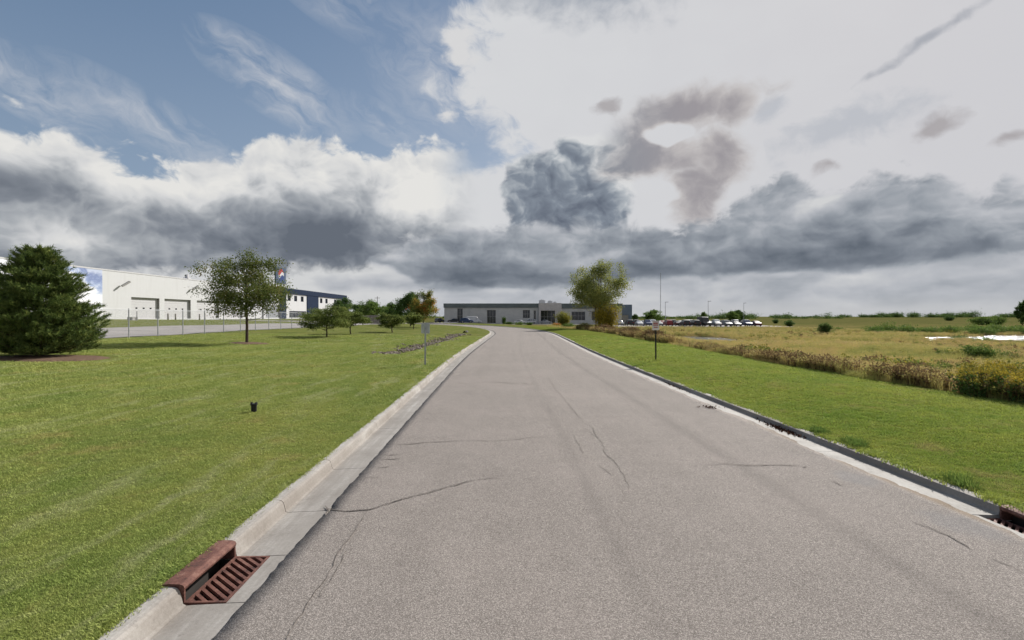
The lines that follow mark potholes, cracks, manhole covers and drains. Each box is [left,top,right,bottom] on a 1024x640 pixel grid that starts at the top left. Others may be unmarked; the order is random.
crack [369,437,529,478]
drain grate [161,540,270,605]
crack [286,478,501,640]
drain grate [986,505,1024,534]
